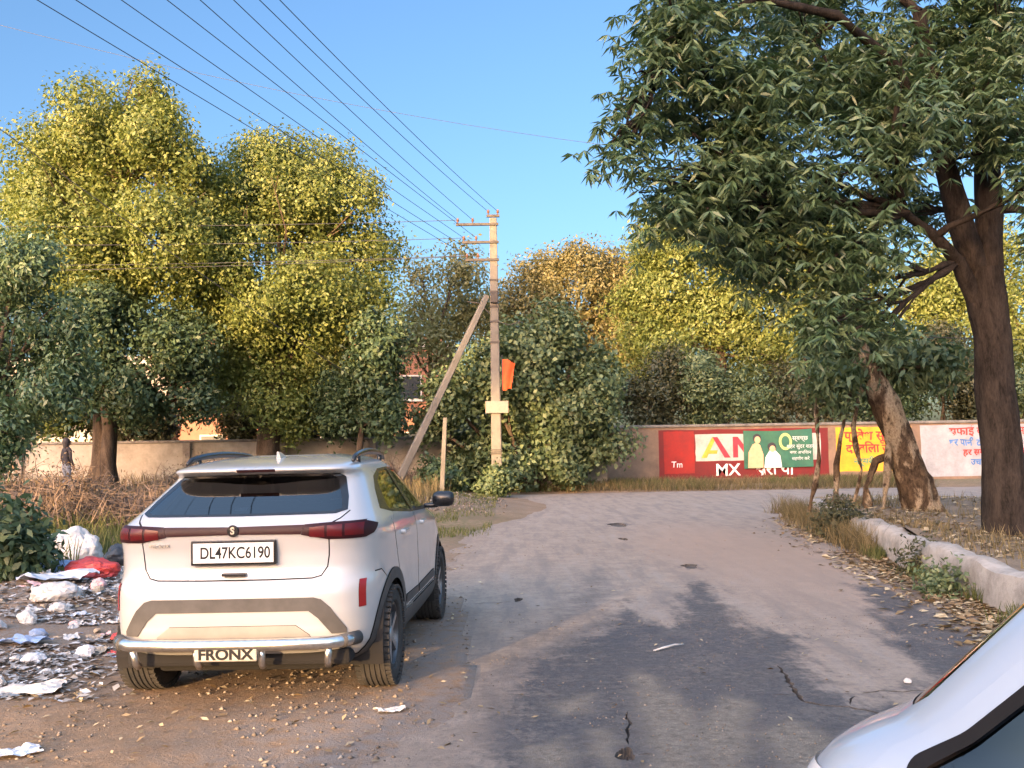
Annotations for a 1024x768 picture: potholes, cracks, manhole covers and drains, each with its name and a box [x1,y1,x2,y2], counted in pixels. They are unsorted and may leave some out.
crack [777,665,925,714]
